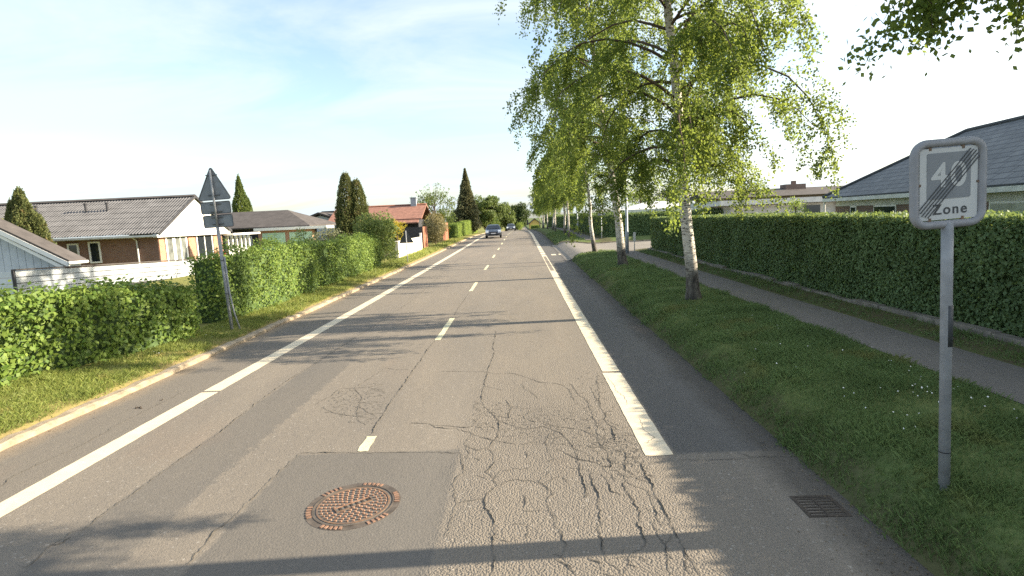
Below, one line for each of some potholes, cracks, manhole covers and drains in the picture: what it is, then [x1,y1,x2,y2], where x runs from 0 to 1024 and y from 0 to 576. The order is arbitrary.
crack [417,334,791,576]
crack [320,341,435,434]
drain grate [789,495,852,518]
manhole cover [304,483,401,531]
